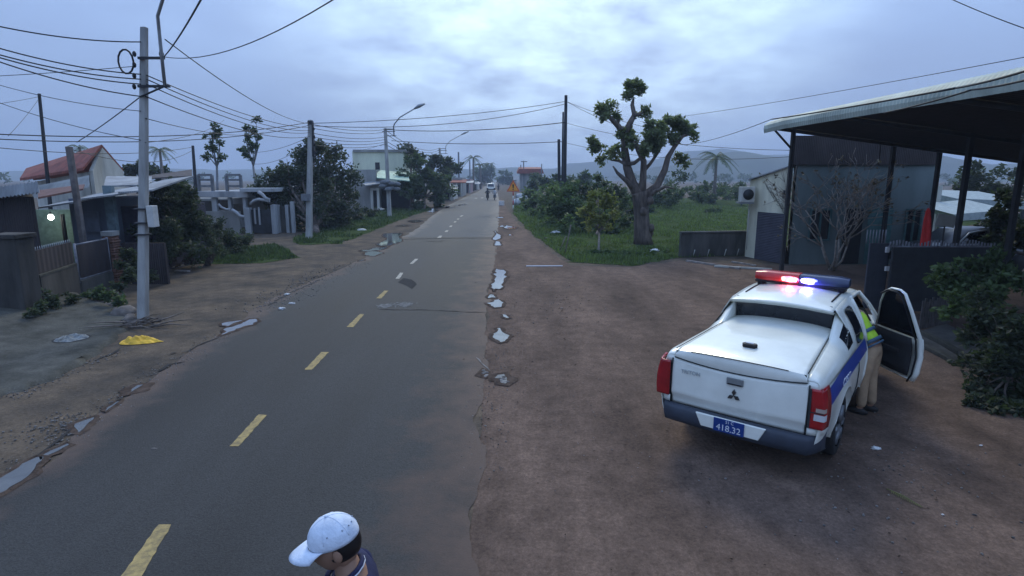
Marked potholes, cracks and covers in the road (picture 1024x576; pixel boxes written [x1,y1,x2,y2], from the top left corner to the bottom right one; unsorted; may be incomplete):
pothole [488,327,514,344]
pothole [0,455,50,498]
pothole [375,233,403,246]
pothole [474,368,491,379]
pothole [488,268,510,291]
pothole [218,318,262,336]
pothole [65,415,101,435]
pothole [100,399,124,413]
pothole [484,299,506,308]
pothole [488,372,518,386]
